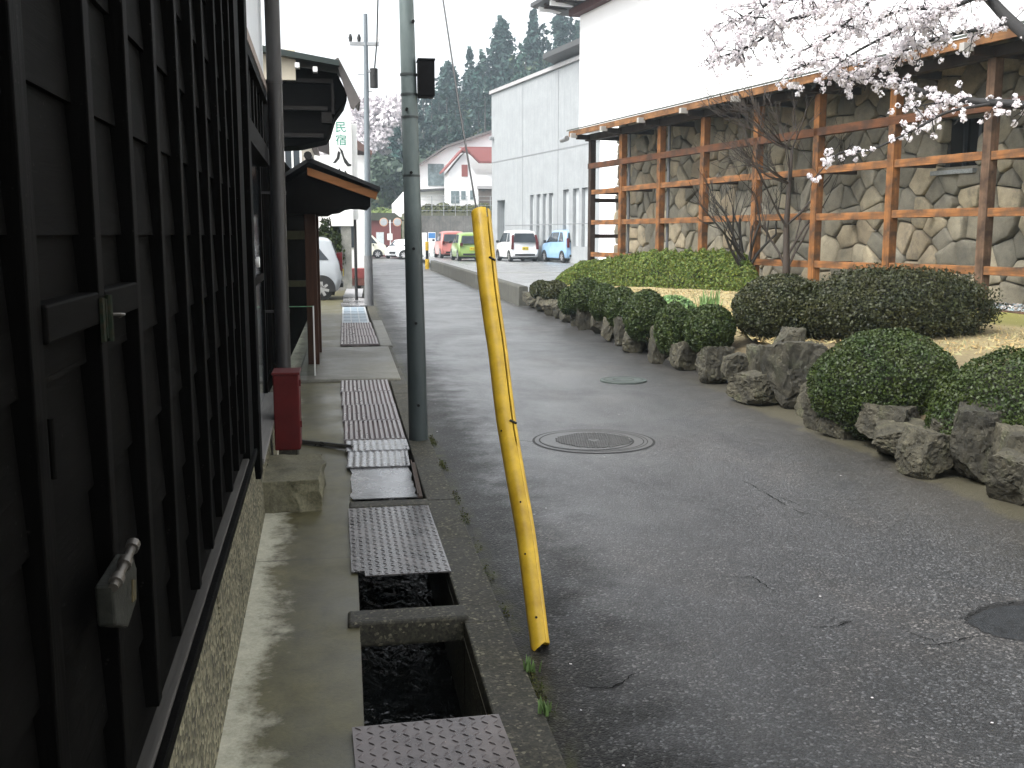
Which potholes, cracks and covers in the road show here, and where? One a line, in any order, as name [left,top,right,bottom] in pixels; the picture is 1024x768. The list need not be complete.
crack [905,630,979,645]
utility cover [600,376,647,384]
manhole cover [532,429,655,454]
